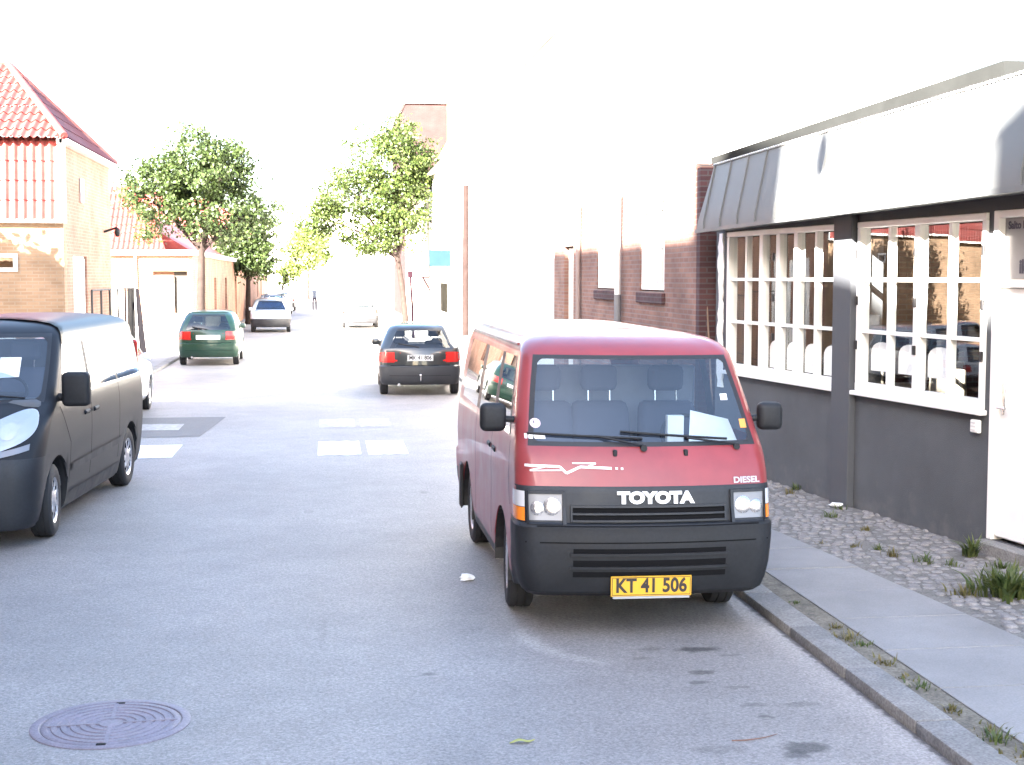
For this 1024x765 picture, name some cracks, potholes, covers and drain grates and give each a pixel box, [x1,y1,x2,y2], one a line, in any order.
manhole cover [29,699,191,750]
